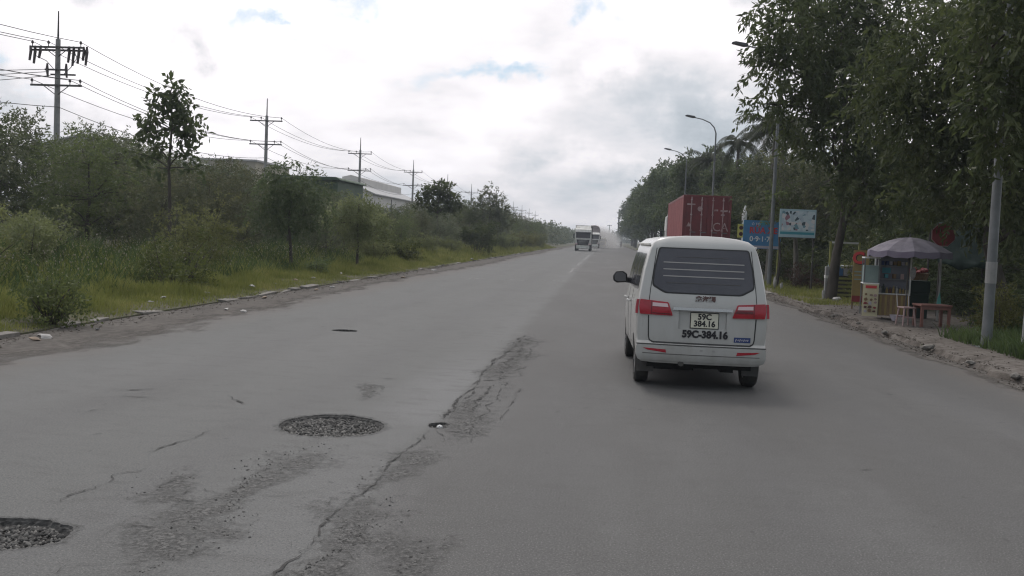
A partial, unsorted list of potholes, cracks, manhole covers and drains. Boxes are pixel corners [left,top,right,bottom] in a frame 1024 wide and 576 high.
pothole [0,516,80,551]
crack [253,451,462,576]
crack [472,335,542,386]
crack [52,441,332,573]
pothole [278,414,387,437]
